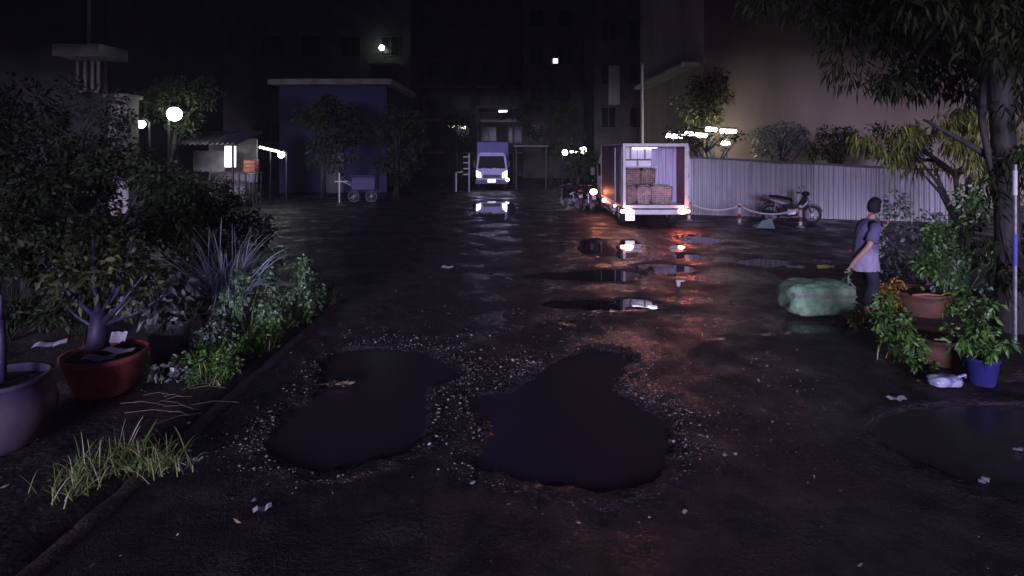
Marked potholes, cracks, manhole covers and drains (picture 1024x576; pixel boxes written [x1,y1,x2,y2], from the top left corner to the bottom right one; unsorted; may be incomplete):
pothole [250,340,479,486]
pothole [623,262,704,276]
pothole [511,268,661,283]
pothole [449,342,697,512]
pothole [527,295,681,315]
